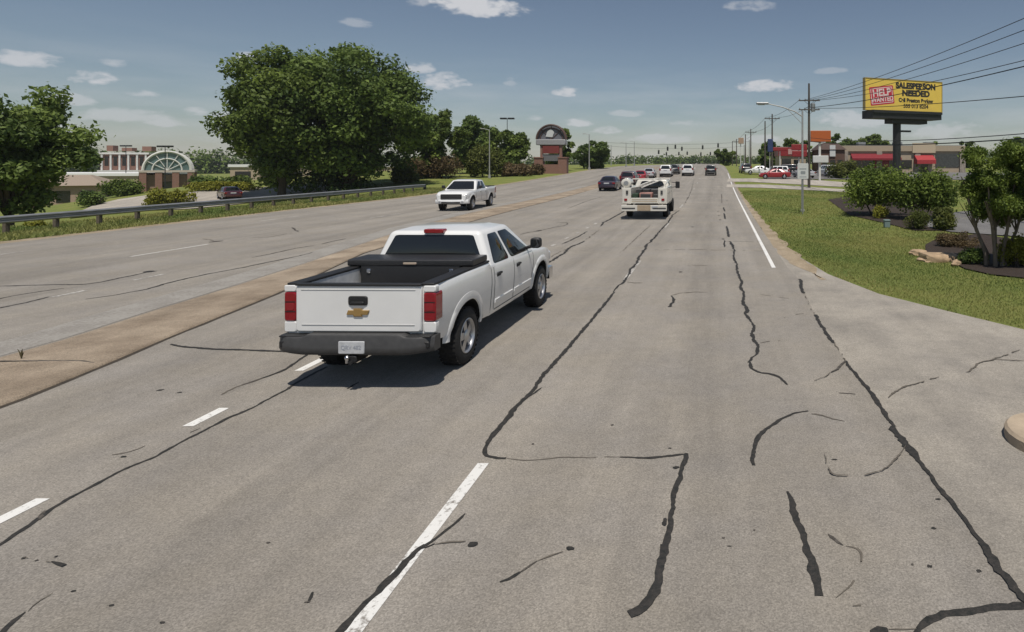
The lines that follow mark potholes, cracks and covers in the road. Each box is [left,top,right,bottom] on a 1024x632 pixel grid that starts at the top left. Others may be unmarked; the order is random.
crack [500,546,574,582]
crack [828,534,863,606]
crack [967,349,1020,372]
